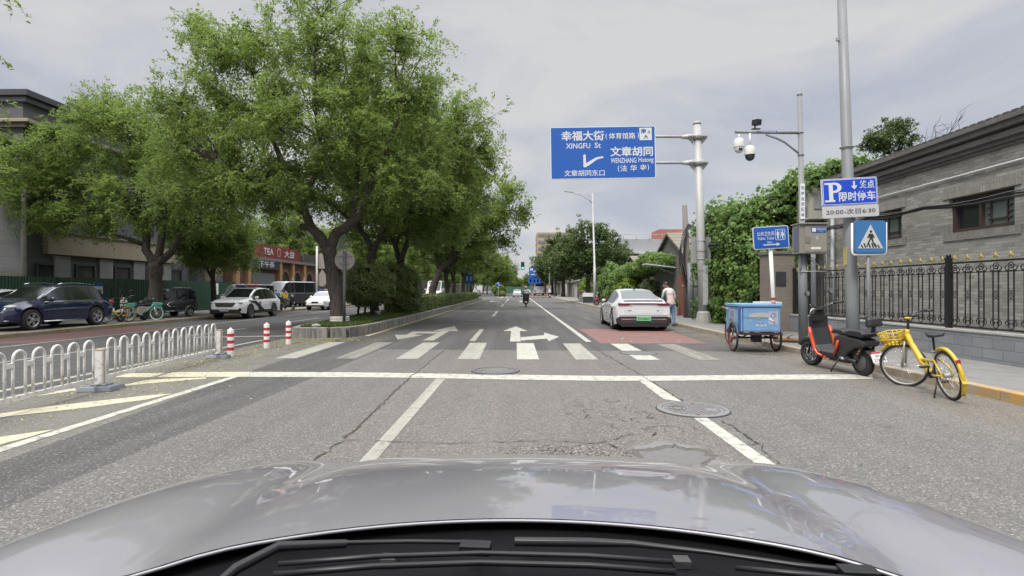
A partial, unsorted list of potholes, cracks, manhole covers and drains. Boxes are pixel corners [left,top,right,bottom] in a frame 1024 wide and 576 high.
crack [375,351,783,466]
pothole [631,443,720,466]
manhole cover [471,367,520,375]
manhole cover [655,401,731,418]
